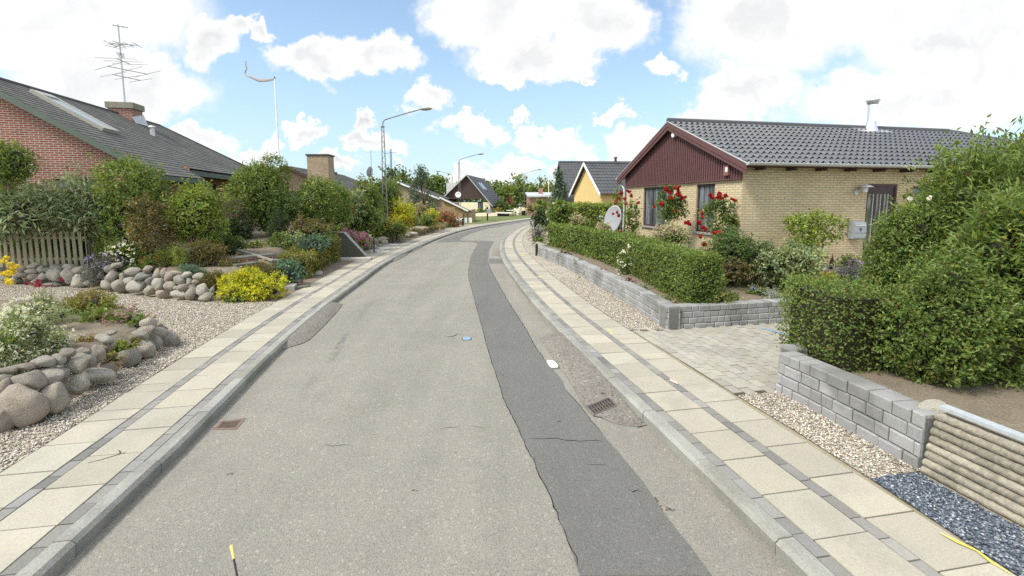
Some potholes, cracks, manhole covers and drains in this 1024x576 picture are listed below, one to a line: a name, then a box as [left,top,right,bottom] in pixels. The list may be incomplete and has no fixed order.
drain grate [586,397,618,416]
crack [527,421,603,442]
